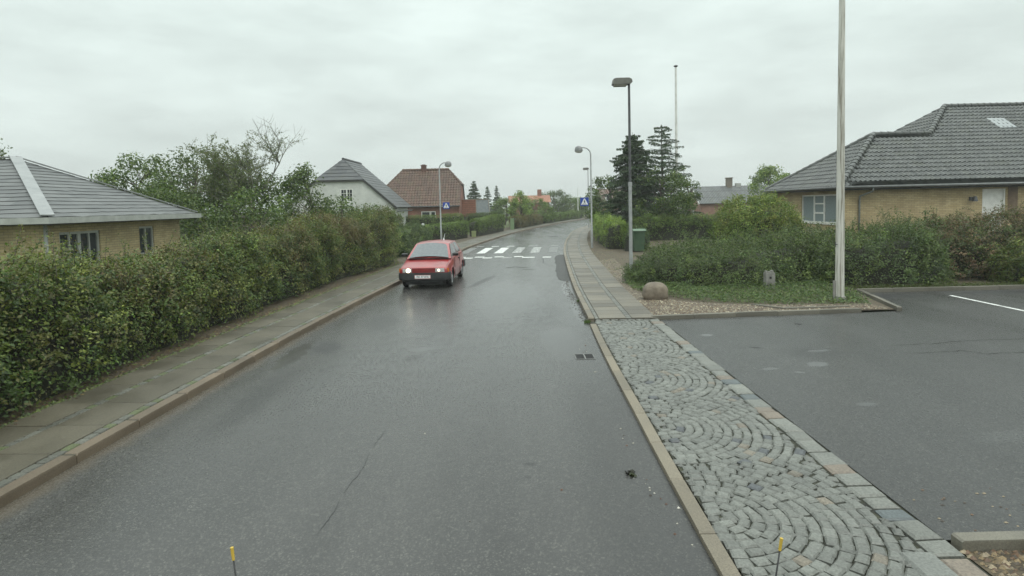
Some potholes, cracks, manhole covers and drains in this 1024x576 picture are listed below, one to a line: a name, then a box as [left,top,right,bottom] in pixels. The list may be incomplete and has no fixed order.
crack [318,429,386,533]
